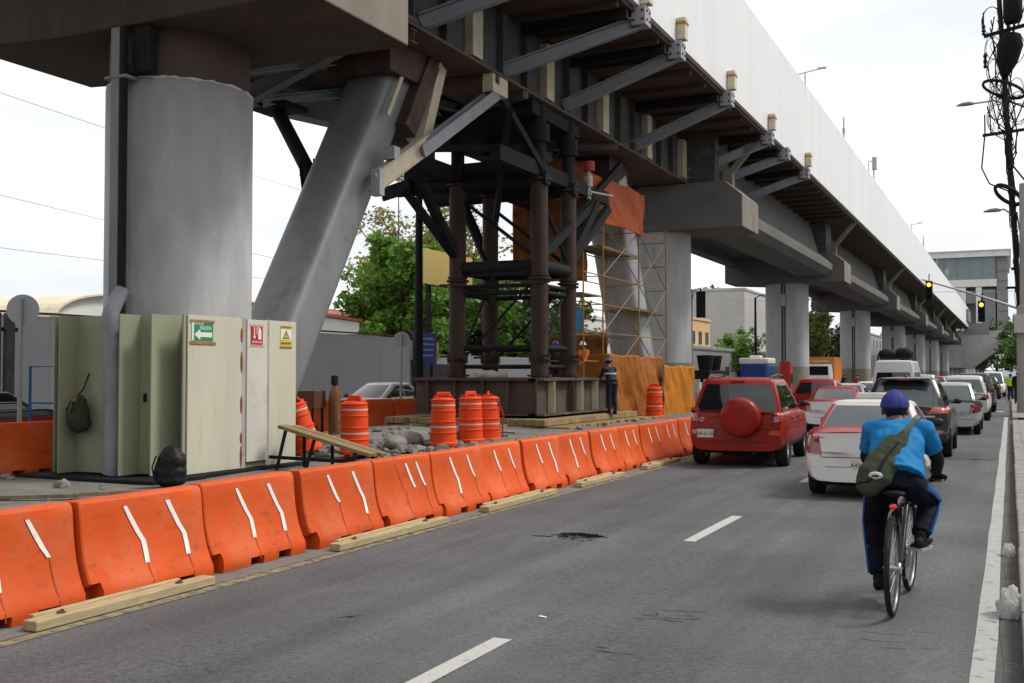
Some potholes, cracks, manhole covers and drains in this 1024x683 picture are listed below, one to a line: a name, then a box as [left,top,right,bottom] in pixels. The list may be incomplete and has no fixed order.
pothole [551,532,606,541]
